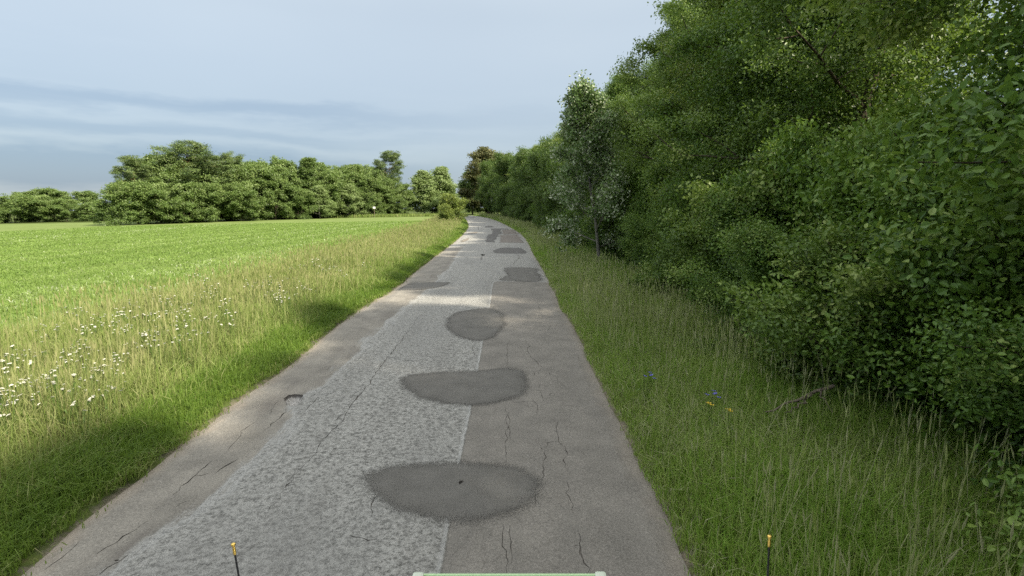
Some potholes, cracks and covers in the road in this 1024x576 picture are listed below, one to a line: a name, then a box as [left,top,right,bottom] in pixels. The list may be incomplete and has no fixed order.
crack [541,423,573,511]
pothole [283,394,303,406]
crack [502,524,512,572]
crack [505,345,558,462]
crack [173,403,284,504]
crack [265,322,423,517]
